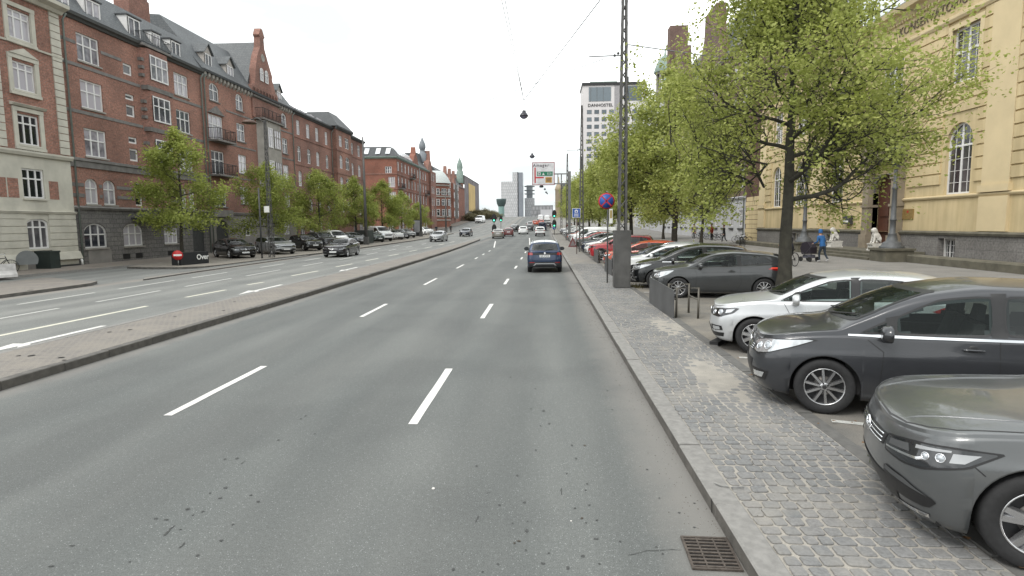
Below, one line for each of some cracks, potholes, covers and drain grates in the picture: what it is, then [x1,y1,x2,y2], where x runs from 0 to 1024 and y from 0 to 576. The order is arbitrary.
drain grate [680,535,744,572]
